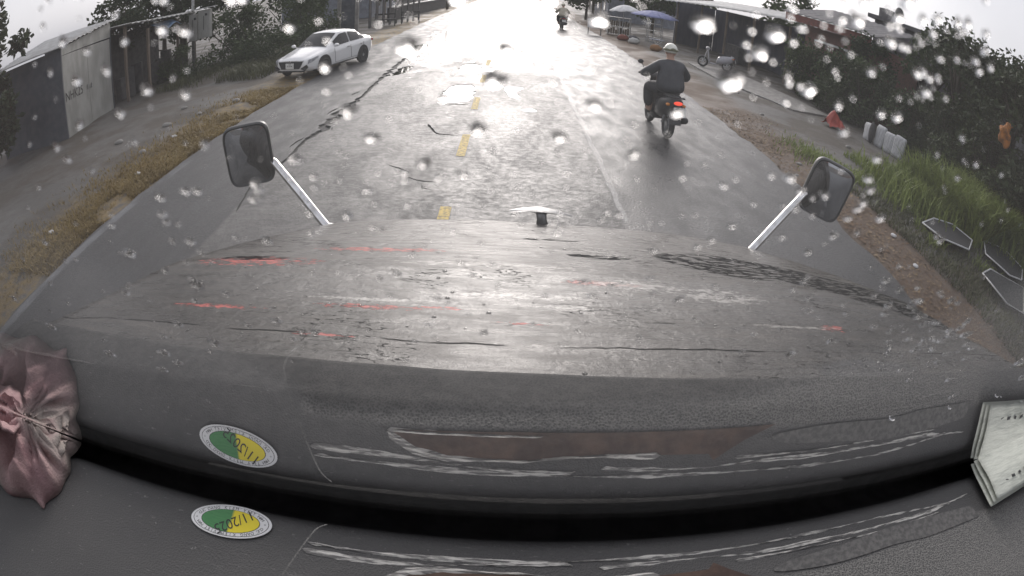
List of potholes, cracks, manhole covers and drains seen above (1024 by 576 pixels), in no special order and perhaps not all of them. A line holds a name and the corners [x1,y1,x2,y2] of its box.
crack [390,165,435,190]
crack [281,55,420,164]
pothole [443,84,476,103]
